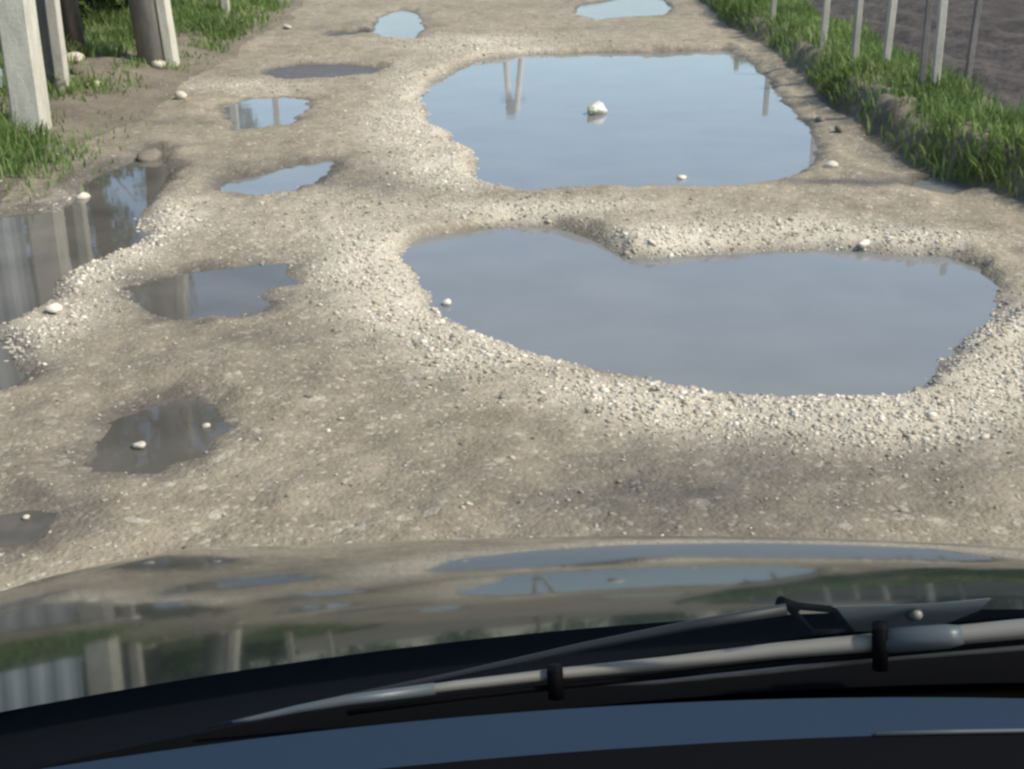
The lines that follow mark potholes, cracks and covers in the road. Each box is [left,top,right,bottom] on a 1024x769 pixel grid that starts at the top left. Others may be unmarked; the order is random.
pothole [0,144,177,324]
pothole [67,386,245,478]
pothole [572,0,676,20]
pothole [386,219,1017,398]
pothole [109,260,307,320]
pothole [412,46,828,190]
pothole [371,8,429,39]
pothole [257,61,385,79]
pothole [213,94,318,131]
pothole [0,494,88,560]
pothole [213,156,340,195]
